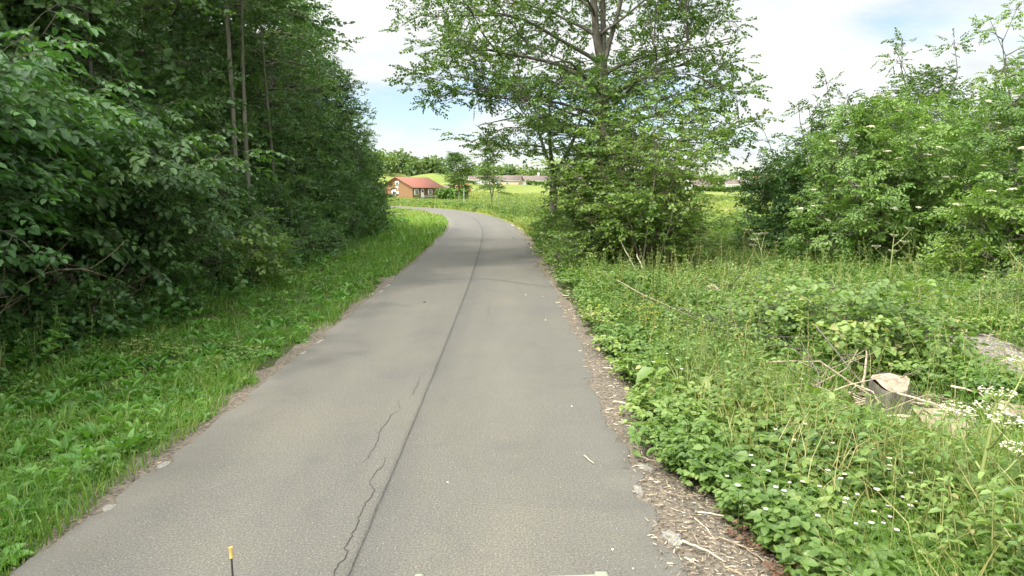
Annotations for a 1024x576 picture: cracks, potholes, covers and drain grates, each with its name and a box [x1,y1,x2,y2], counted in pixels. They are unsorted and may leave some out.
crack [334,379,420,576]
